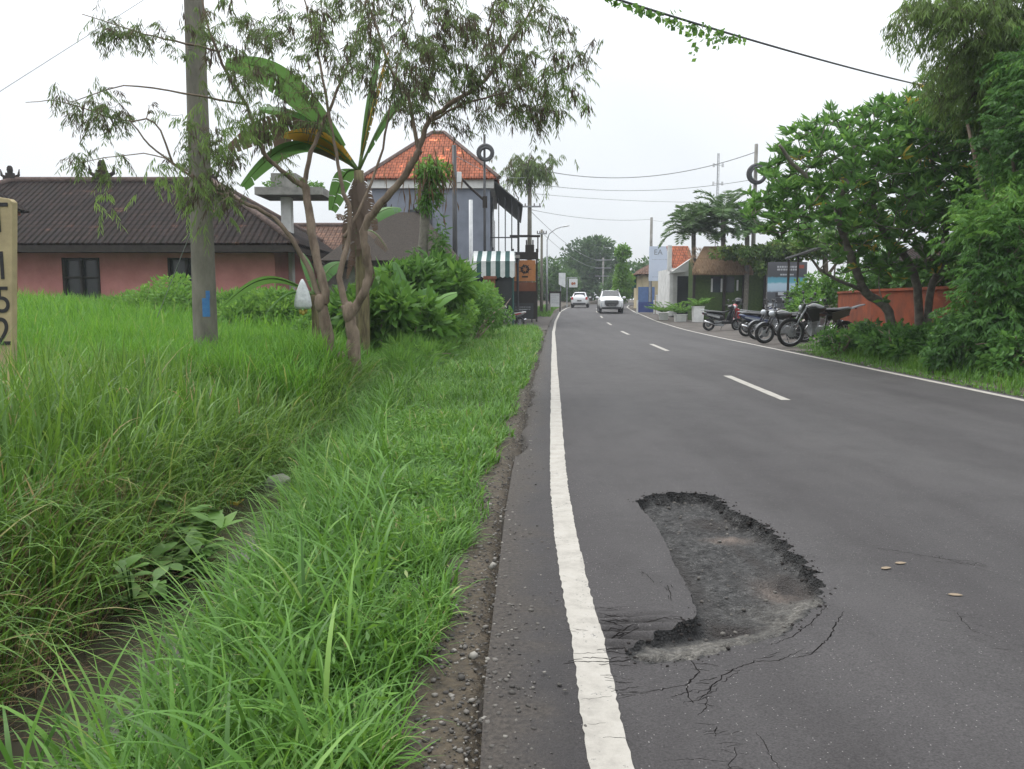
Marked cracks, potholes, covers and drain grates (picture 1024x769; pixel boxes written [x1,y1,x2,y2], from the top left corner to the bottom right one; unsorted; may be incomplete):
pothole [624,490,837,667]
crack [878,548,986,570]
crack [560,569,843,769]
crack [935,610,1015,651]
